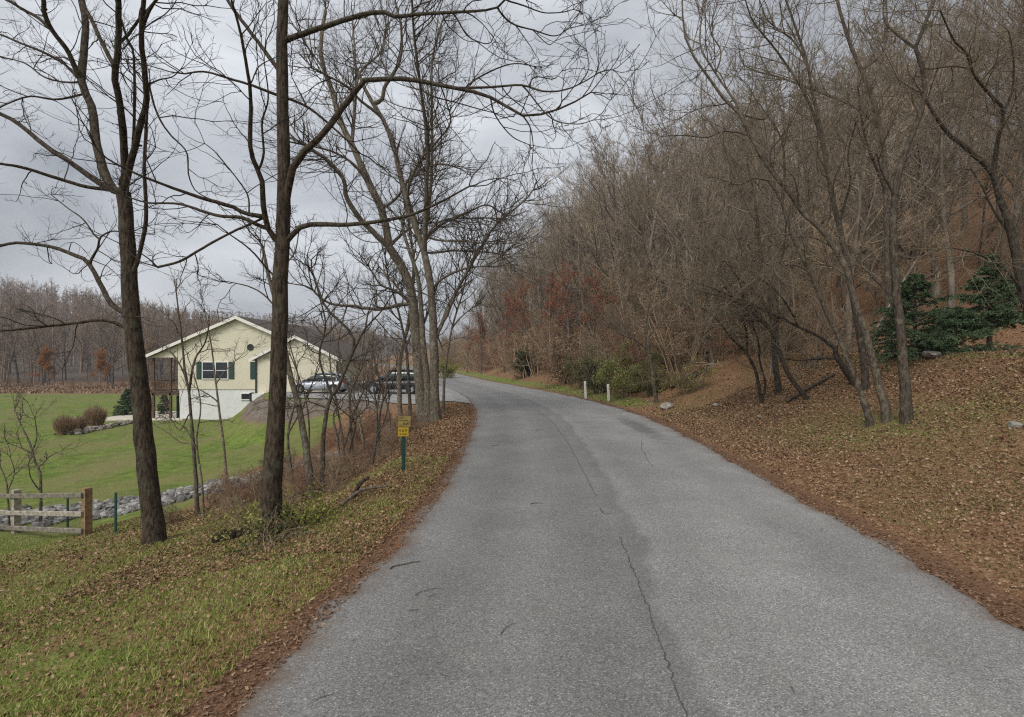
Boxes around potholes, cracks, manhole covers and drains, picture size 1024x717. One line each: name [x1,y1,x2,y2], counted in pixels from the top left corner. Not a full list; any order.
crack [619,536,687,717]
